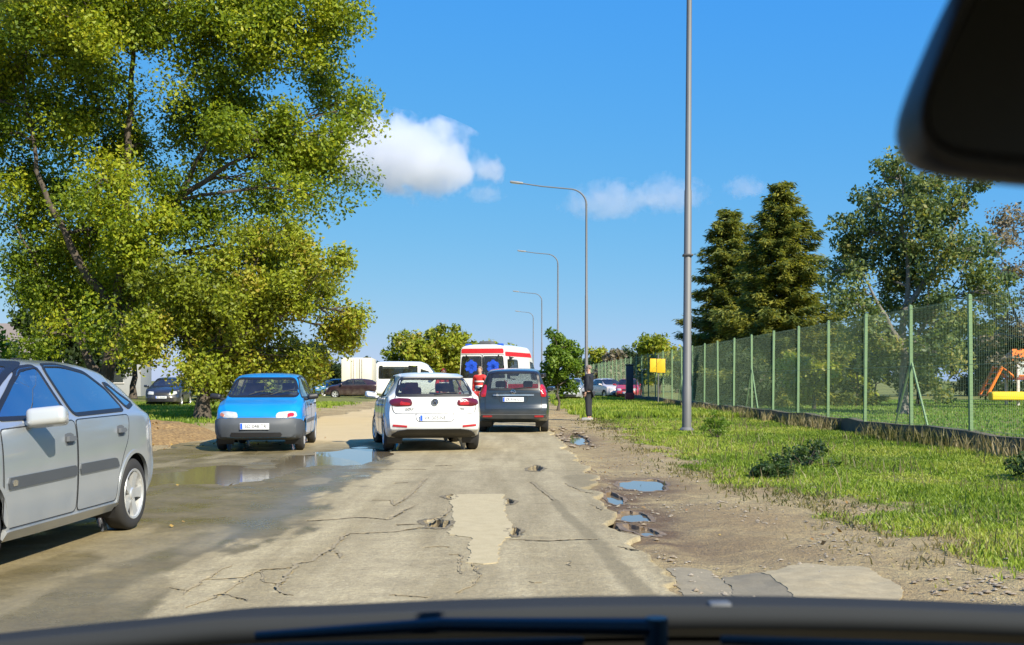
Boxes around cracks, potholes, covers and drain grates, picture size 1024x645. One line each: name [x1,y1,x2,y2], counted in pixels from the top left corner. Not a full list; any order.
pothole [503,526,526,537]
pothole [602,491,628,505]
pothole [613,478,671,492]
pothole [616,523,667,538]
crack [531,482,602,510]
crack [169,465,482,608]
pothole [417,518,456,529]
pothole [616,509,656,523]
